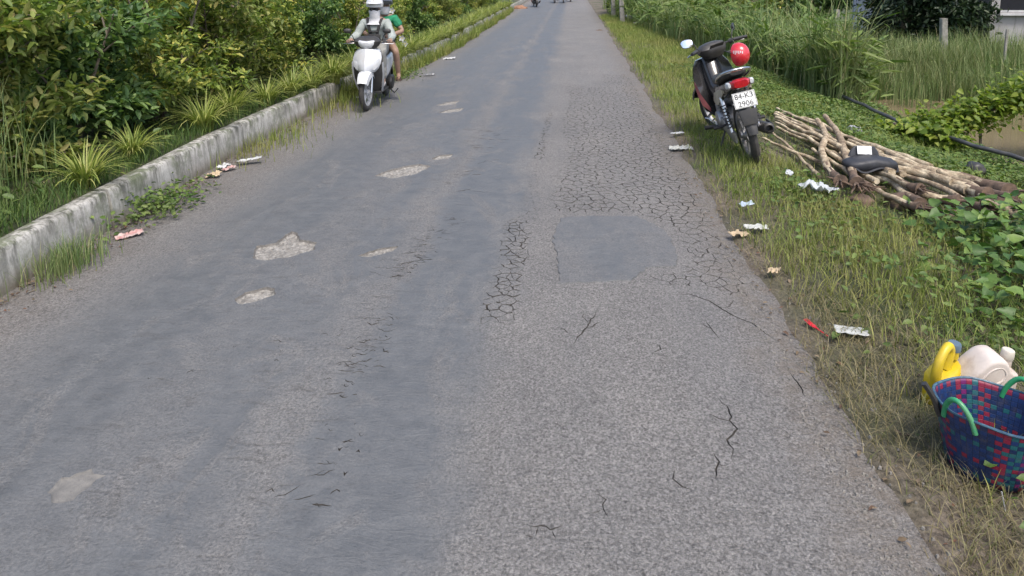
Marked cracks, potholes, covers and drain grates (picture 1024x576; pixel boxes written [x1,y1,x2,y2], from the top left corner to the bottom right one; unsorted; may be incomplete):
crack [525,525,563,538]
crack [266,424,364,507]
crack [549,74,774,339]
crack [479,113,553,328]
crack [710,399,740,479]
